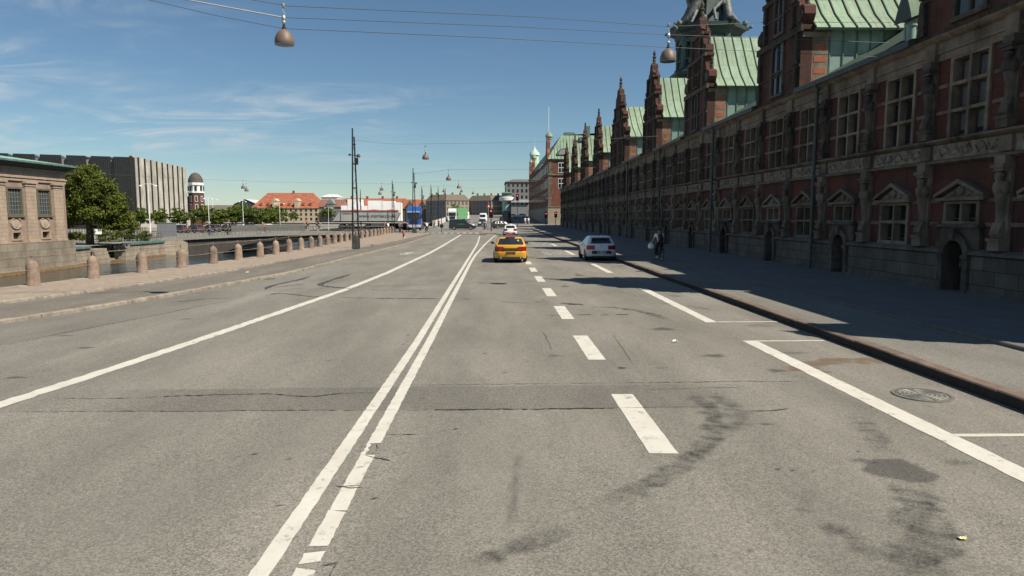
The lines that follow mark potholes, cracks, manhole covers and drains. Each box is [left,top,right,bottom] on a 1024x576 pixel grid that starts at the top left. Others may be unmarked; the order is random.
manhole cover [891,388,955,402]
